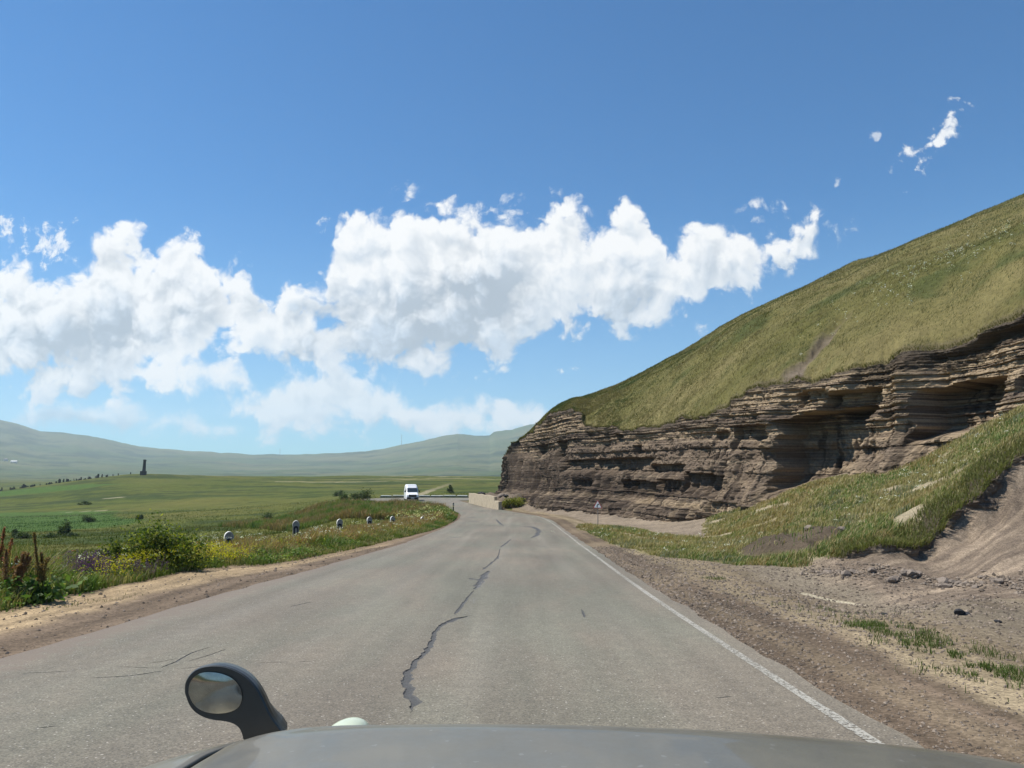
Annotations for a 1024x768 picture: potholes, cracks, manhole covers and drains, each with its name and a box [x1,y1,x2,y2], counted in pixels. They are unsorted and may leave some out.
crack [454,519,511,614]
crack [35,646,223,678]
